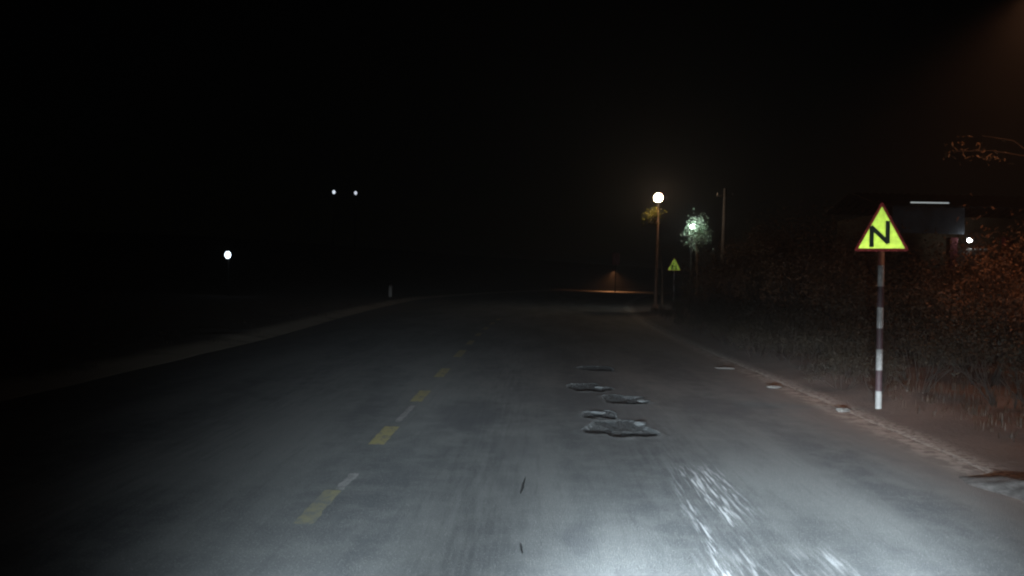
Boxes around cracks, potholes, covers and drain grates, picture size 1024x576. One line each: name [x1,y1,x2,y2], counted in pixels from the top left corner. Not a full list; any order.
pothole [562,382,620,393]
pothole [578,409,621,422]
pothole [598,393,656,406]
pothole [572,417,670,440]
pothole [573,365,619,373]
